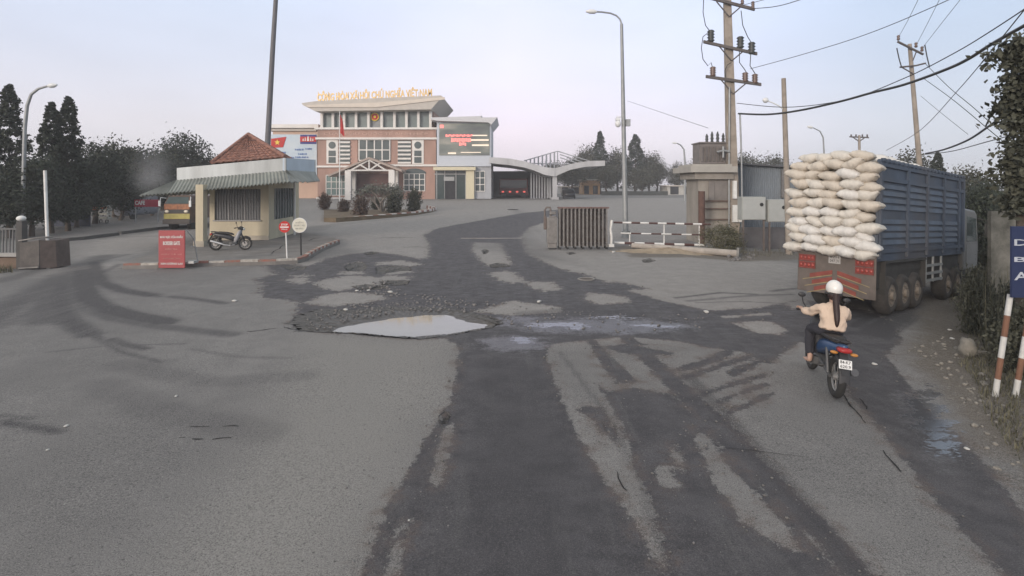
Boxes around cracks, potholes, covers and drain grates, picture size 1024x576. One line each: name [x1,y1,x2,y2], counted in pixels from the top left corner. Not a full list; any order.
crack [179,425,237,440]
pothole [285,306,501,339]
